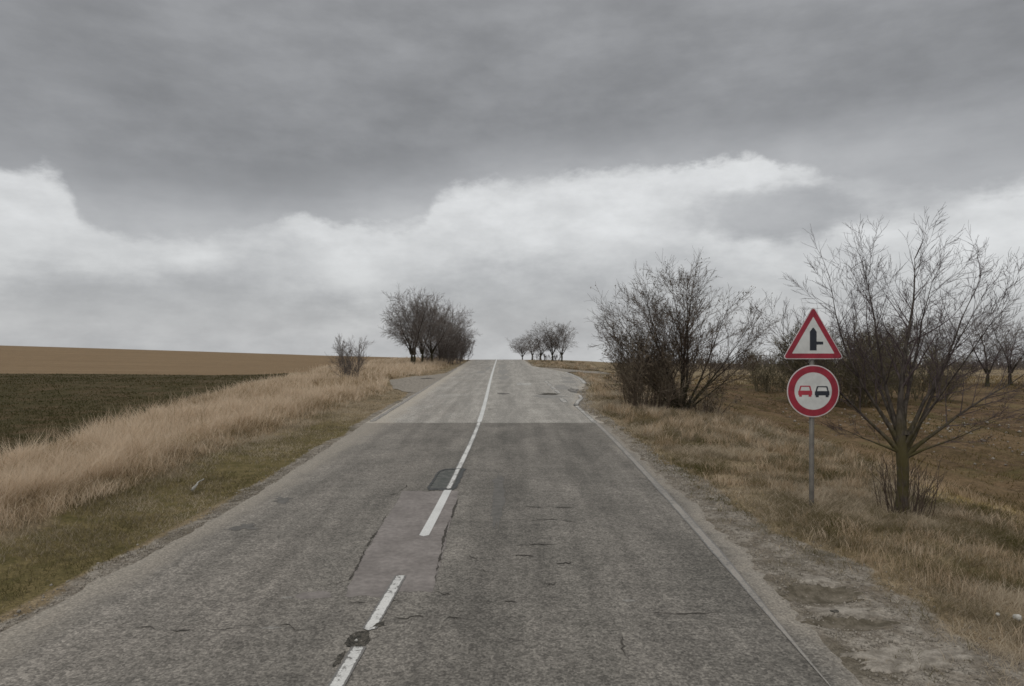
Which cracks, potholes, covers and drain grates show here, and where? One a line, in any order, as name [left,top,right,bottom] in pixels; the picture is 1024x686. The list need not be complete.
crack [349,499,458,619]
crack [332,515,387,584]
pothole [344,630,370,648]
